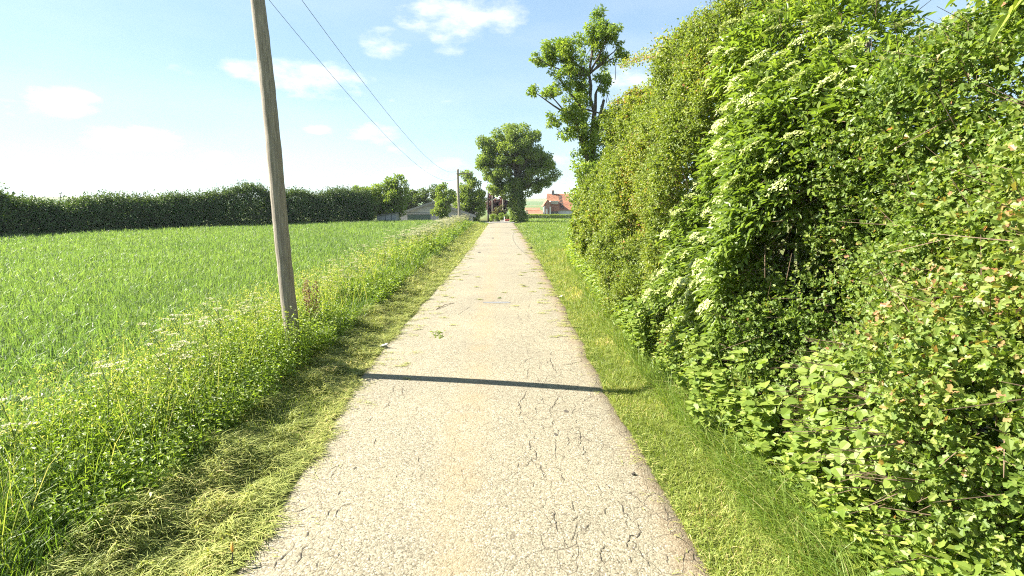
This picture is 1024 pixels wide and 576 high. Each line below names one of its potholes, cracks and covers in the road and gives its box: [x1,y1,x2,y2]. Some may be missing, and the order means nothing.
crack [553,483,648,564]
crack [517,362,598,481]
